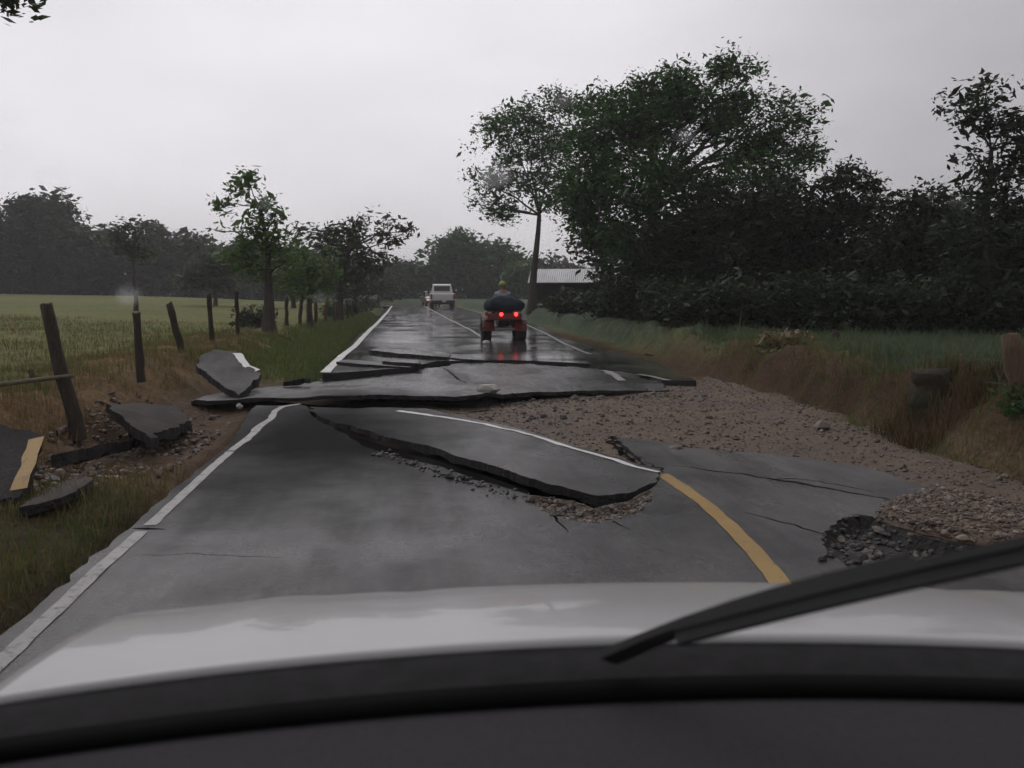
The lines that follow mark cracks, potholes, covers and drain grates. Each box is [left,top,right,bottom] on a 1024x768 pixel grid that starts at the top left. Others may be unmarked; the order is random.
crack [350,368,540,413]
pothole [819,514,972,567]
pothole [522,489,653,524]
crack [744,512,821,534]
